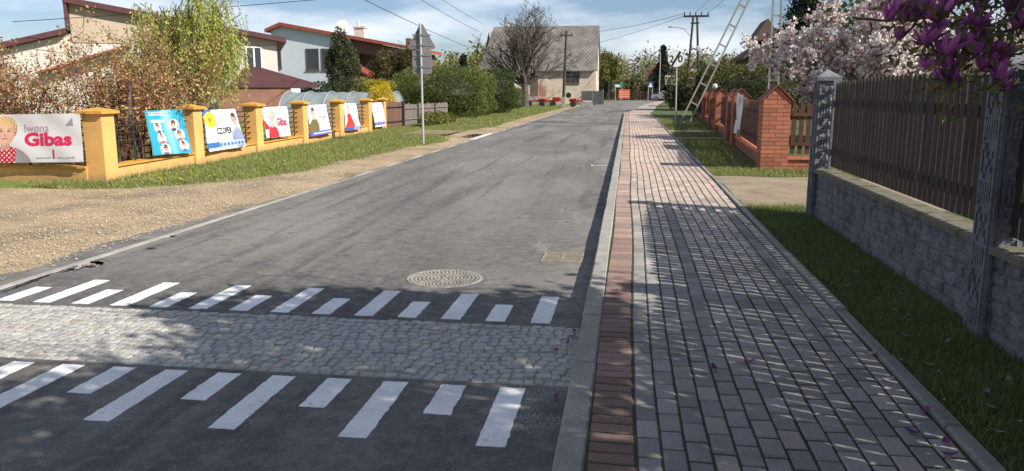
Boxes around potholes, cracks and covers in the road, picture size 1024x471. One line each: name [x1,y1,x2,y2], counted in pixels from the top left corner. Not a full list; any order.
pothole [54,259,112,274]
manhole cover [406,269,483,288]
drain grate [540,251,585,263]
